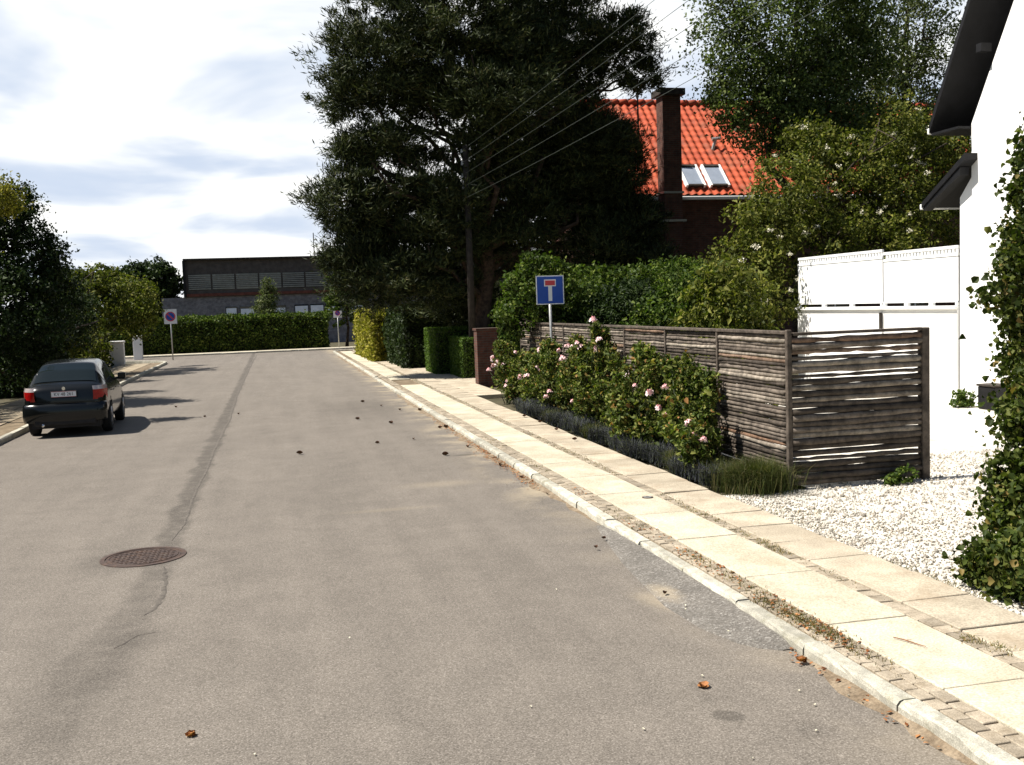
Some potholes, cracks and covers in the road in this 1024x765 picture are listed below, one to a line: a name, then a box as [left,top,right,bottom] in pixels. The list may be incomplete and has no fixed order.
manhole cover [100,546,187,568]
